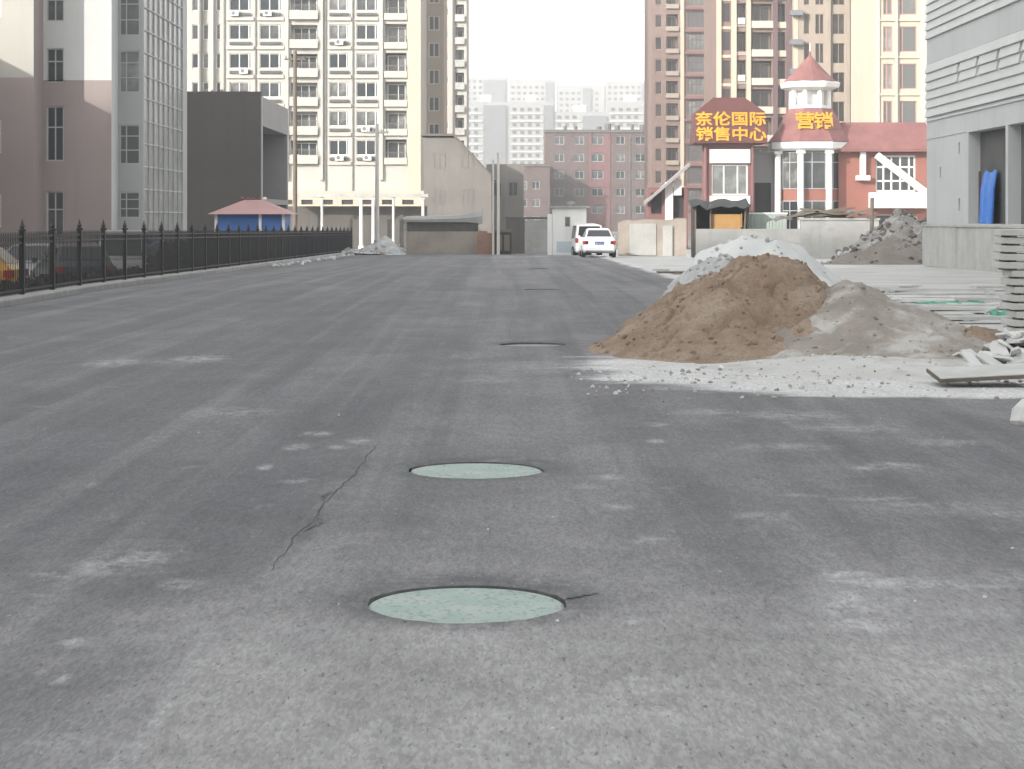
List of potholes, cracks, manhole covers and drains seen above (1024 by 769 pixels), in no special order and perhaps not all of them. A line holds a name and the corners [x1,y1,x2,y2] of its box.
manhole cover [368,585,567,623]
manhole cover [411,462,544,479]
crack [271,444,378,571]
